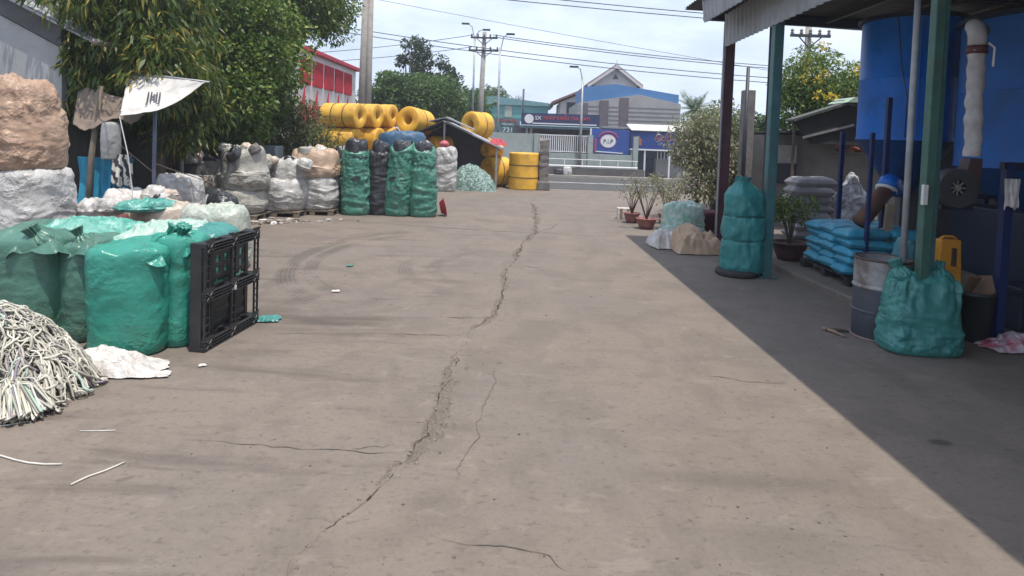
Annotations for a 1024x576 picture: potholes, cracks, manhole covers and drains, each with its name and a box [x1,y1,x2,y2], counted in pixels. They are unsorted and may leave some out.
crack [243,203,570,576]
